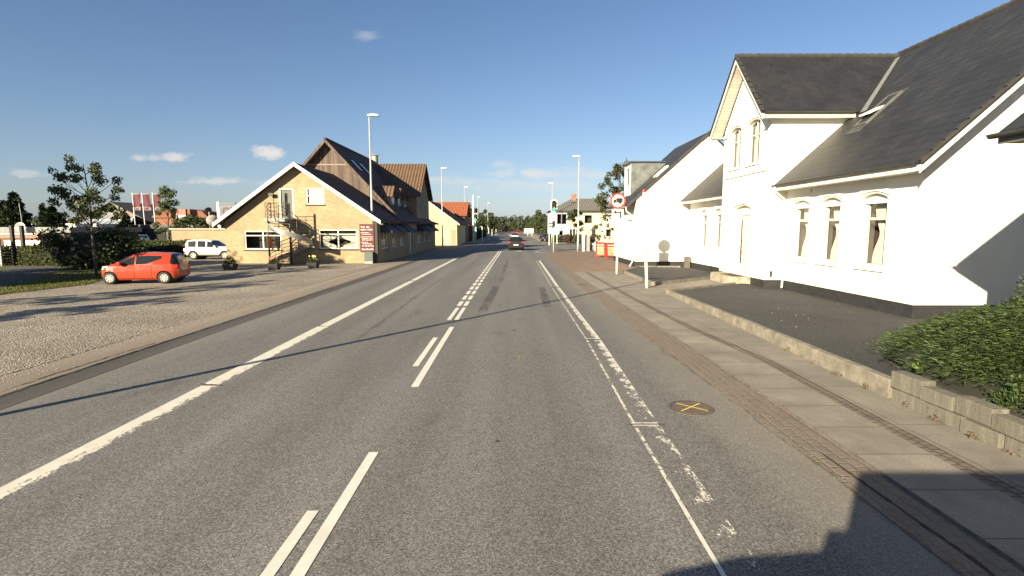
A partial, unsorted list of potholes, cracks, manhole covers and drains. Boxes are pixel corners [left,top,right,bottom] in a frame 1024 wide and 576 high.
manhole cover [667,400,714,416]
